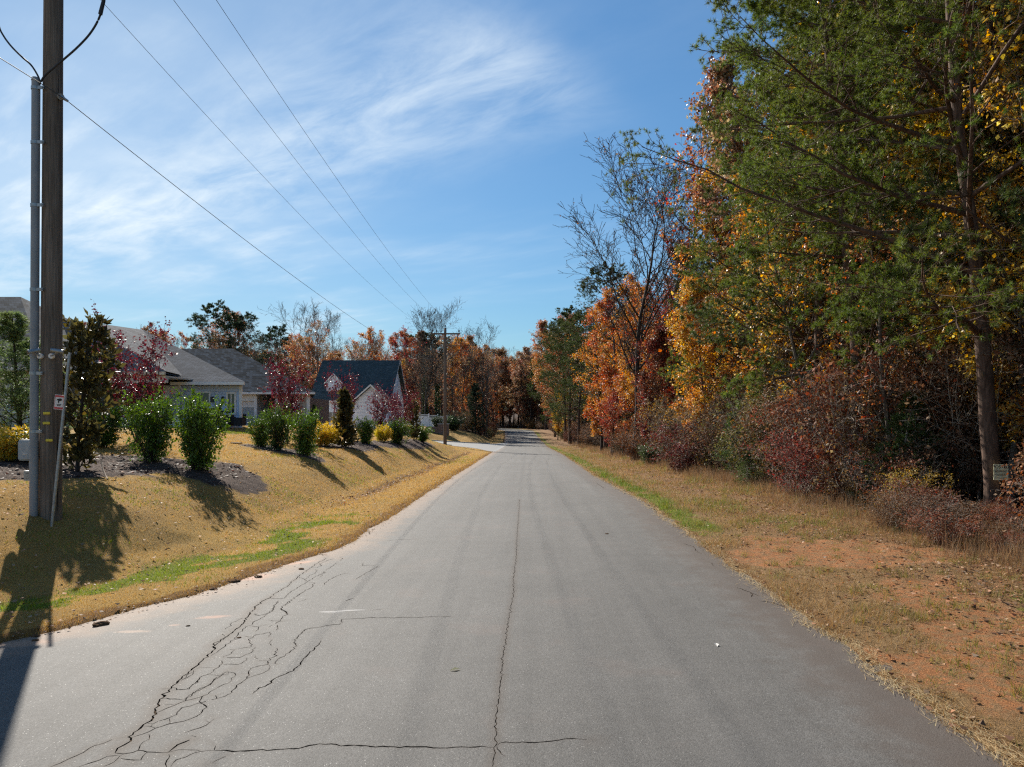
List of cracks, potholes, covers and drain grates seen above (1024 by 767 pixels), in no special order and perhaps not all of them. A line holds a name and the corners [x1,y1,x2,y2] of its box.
crack [215,501,587,766]
crack [53,558,422,767]
